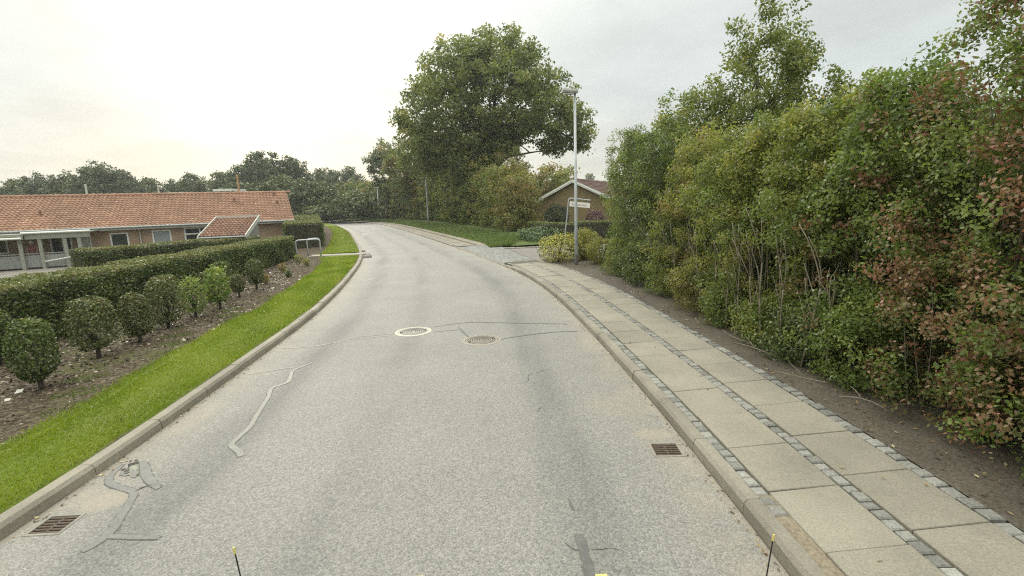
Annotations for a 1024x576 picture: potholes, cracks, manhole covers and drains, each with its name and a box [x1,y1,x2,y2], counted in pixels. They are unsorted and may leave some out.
drain grate [21,513,87,537]
manhole cover [395,327,432,337]
drain grate [648,442,686,457]
manhole cover [462,335,501,346]
